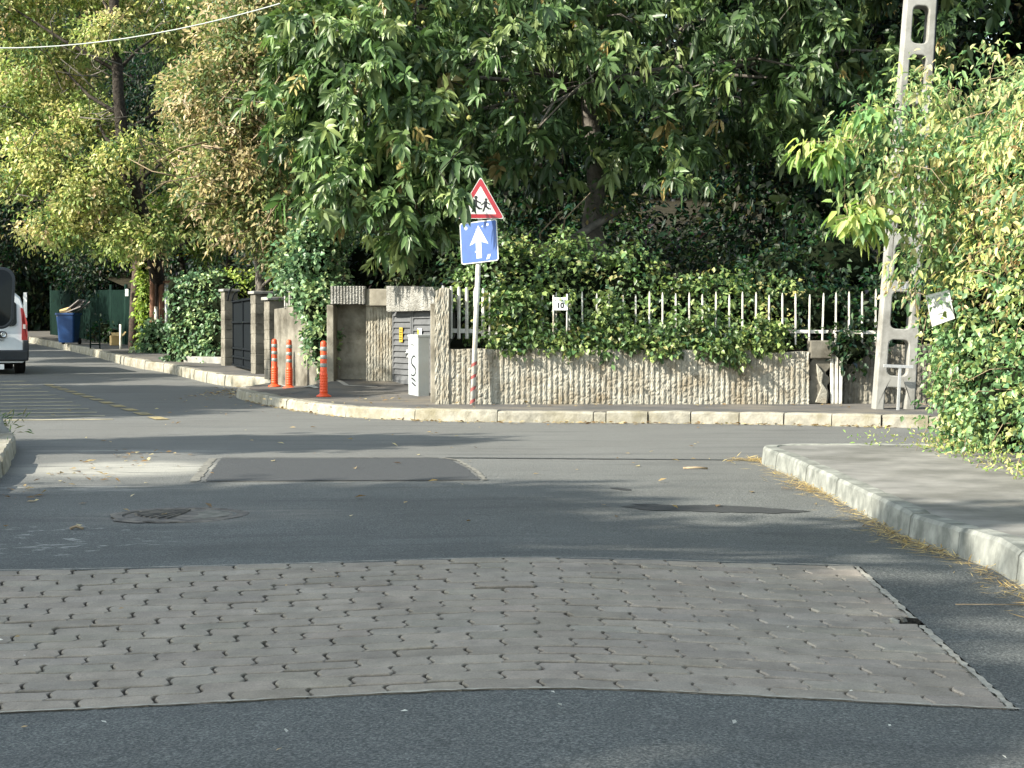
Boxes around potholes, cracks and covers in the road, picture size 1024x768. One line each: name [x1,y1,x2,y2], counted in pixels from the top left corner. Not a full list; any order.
manhole cover [110,507,250,523]
